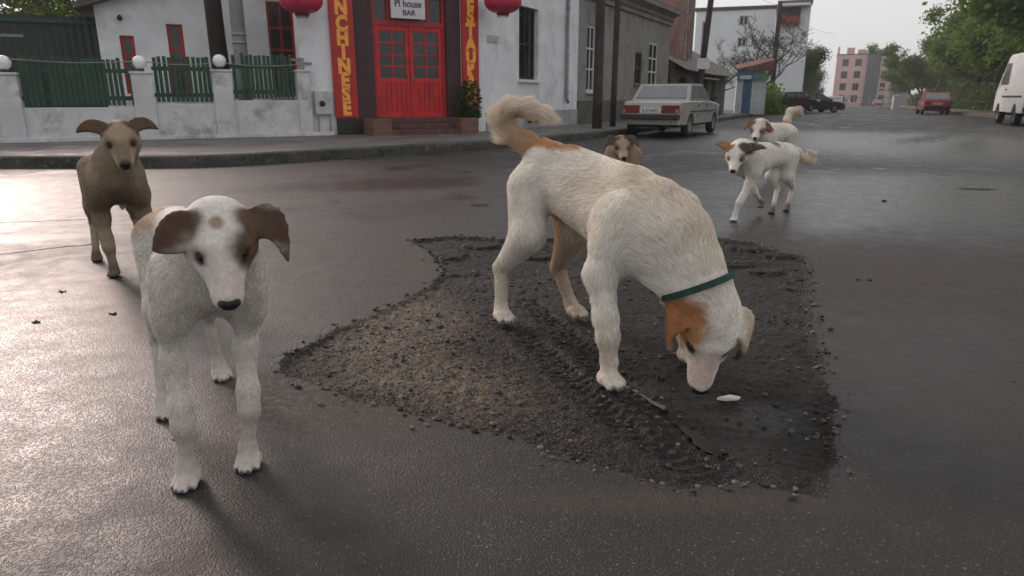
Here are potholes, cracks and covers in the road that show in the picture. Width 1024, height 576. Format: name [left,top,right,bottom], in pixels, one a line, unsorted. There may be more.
pothole [278,237,840,498]
